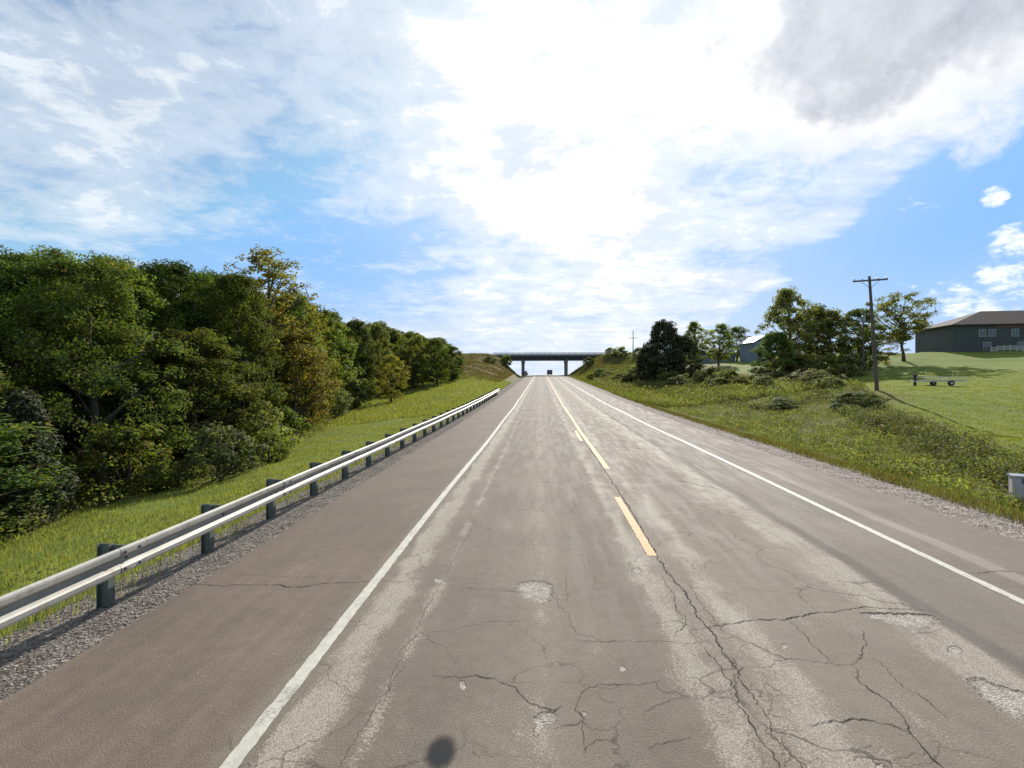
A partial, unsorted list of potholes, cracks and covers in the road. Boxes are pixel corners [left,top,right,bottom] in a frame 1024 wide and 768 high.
pothole [531,709,558,741]
crack [485,423,944,768]
pothole [947,645,964,654]
pothole [858,612,941,630]
crack [440,674,683,753]
pothole [514,580,554,605]
crack [175,574,410,587]
pothole [965,676,1024,724]
